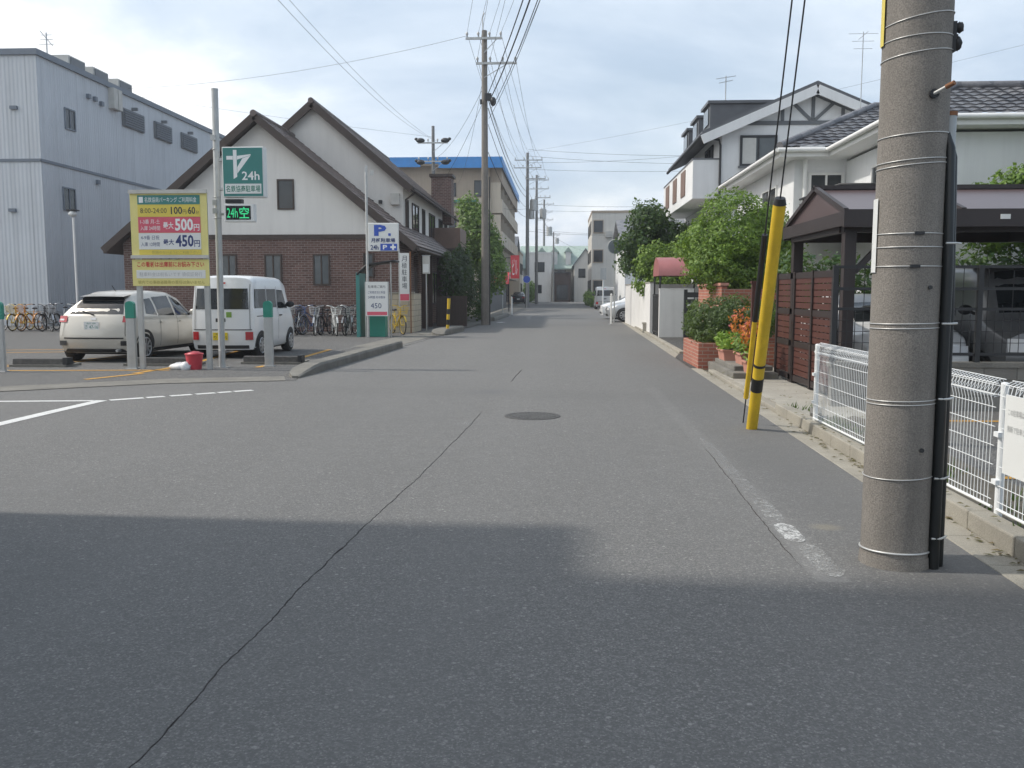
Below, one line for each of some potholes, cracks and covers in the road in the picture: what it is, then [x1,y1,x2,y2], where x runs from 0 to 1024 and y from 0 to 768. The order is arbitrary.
manhole cover [505,412,560,420]
crack [706,450,795,560]
crack [129,413,481,768]
